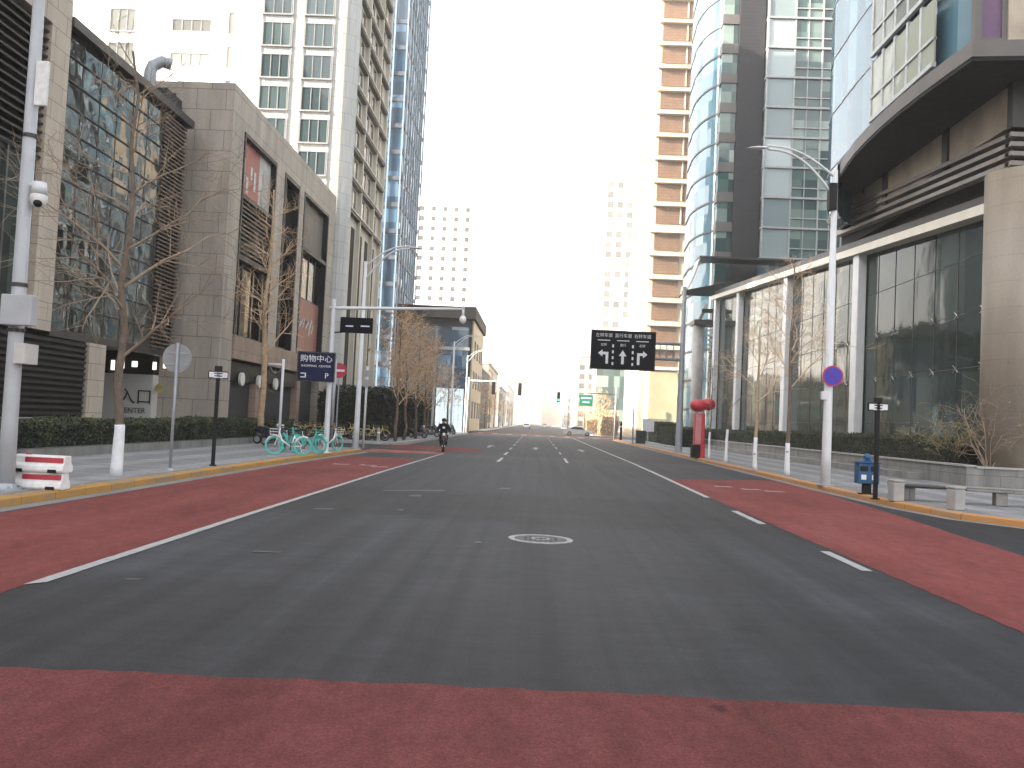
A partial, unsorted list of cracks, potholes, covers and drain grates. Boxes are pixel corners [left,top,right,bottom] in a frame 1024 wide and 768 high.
manhole cover [508,534,573,544]
